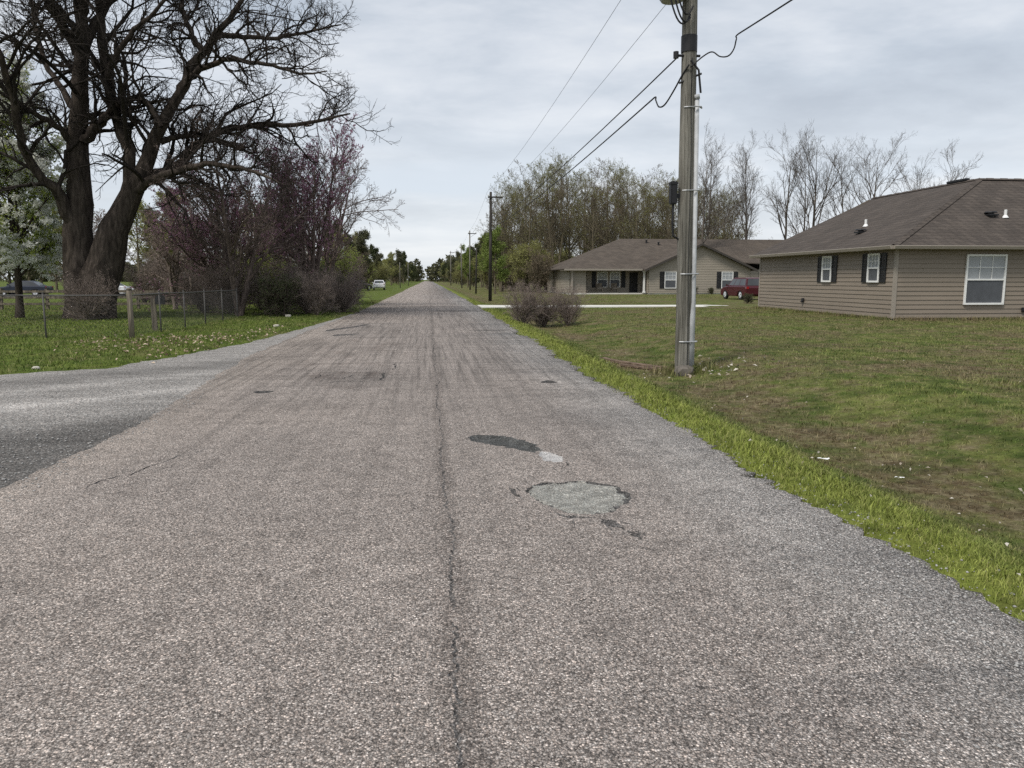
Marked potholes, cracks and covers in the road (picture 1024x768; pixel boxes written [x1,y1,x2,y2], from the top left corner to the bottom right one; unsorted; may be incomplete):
crack [556,513,646,540]
crack [431,317,464,768]
crack [84,448,208,489]
